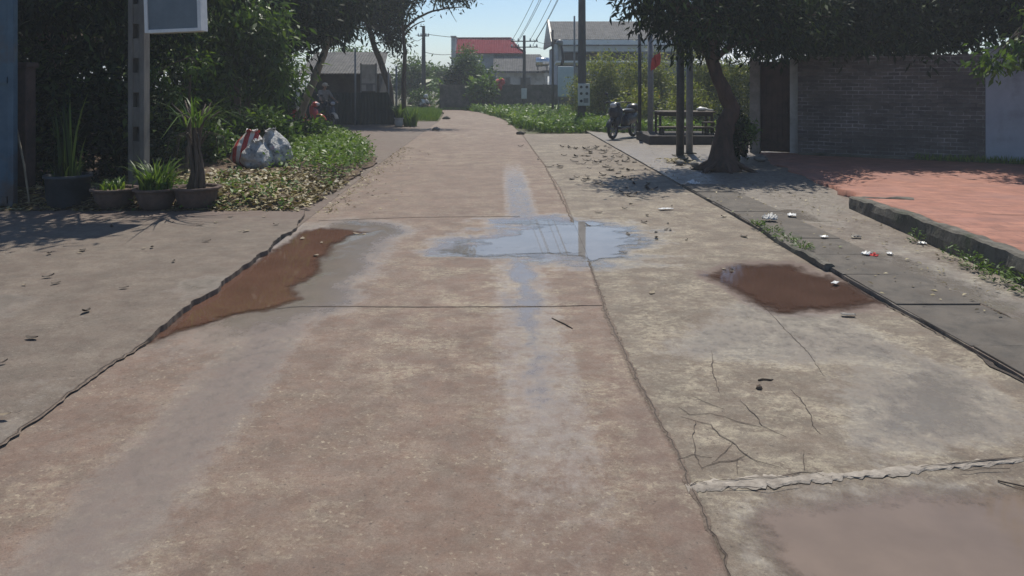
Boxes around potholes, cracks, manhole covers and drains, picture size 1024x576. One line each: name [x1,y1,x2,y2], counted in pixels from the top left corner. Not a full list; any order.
crack [278,261,1024,576]
